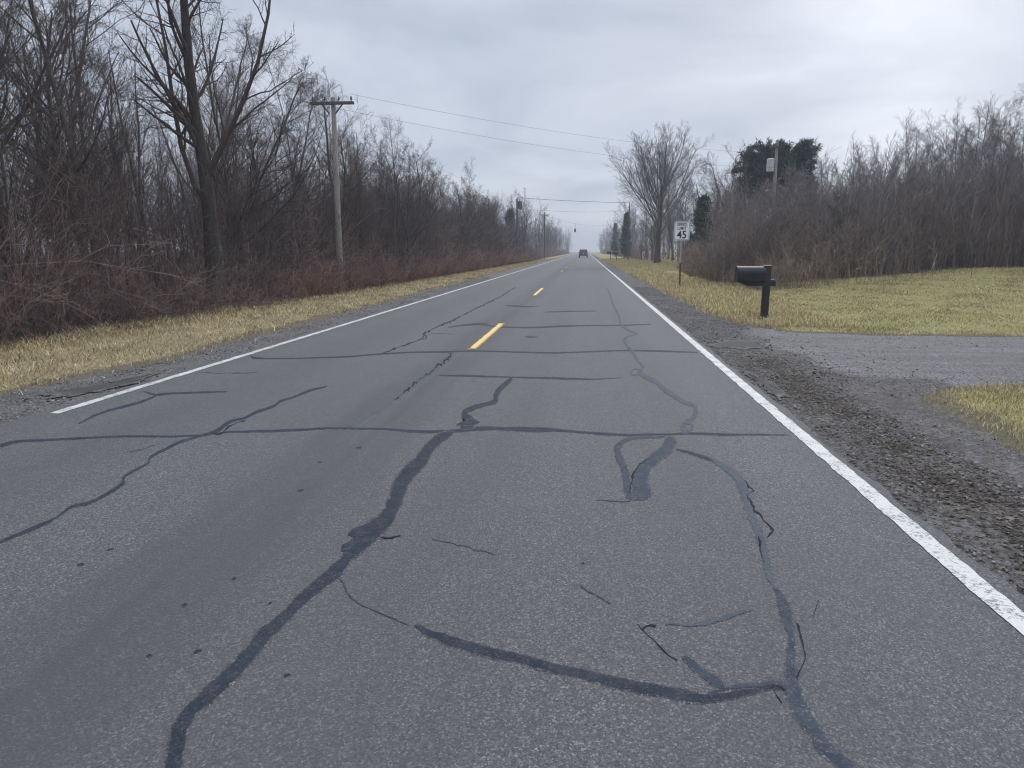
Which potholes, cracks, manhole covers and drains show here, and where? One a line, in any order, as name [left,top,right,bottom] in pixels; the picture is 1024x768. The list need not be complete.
crack [432,539,494,555]
crack [637,624,677,661]
crack [772,600,819,703]
crack [384,287,516,400]
